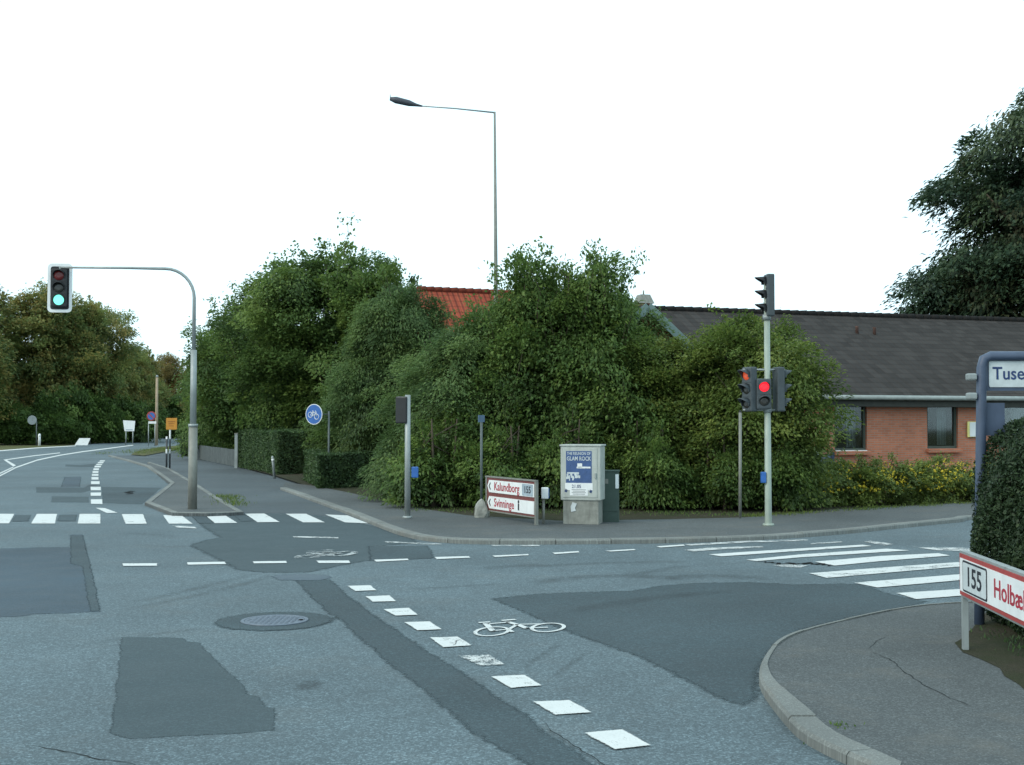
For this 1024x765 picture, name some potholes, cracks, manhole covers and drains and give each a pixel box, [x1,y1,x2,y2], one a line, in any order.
crack [34,745,135,765]
crack [870,637,970,706]
manhole cover [240,615,309,626]
